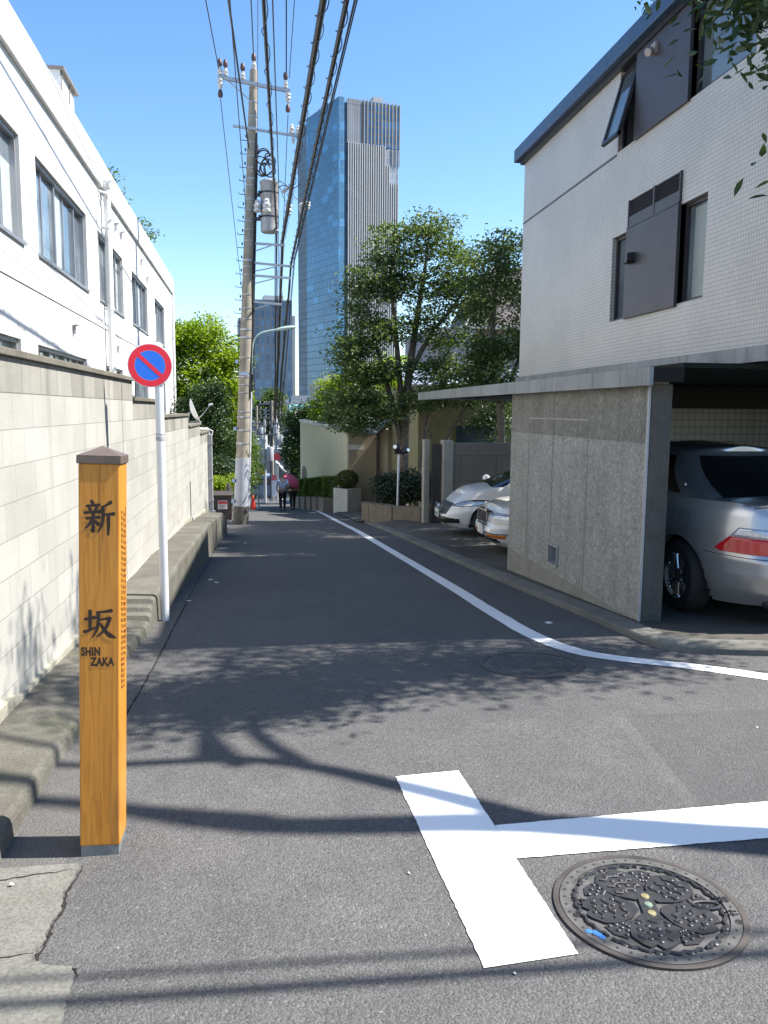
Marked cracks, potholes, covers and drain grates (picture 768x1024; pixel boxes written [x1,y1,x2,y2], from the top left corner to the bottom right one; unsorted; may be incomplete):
crack [0,865,84,974]
manhole cover [553,855,750,972]
manhole cover [479,651,584,679]
